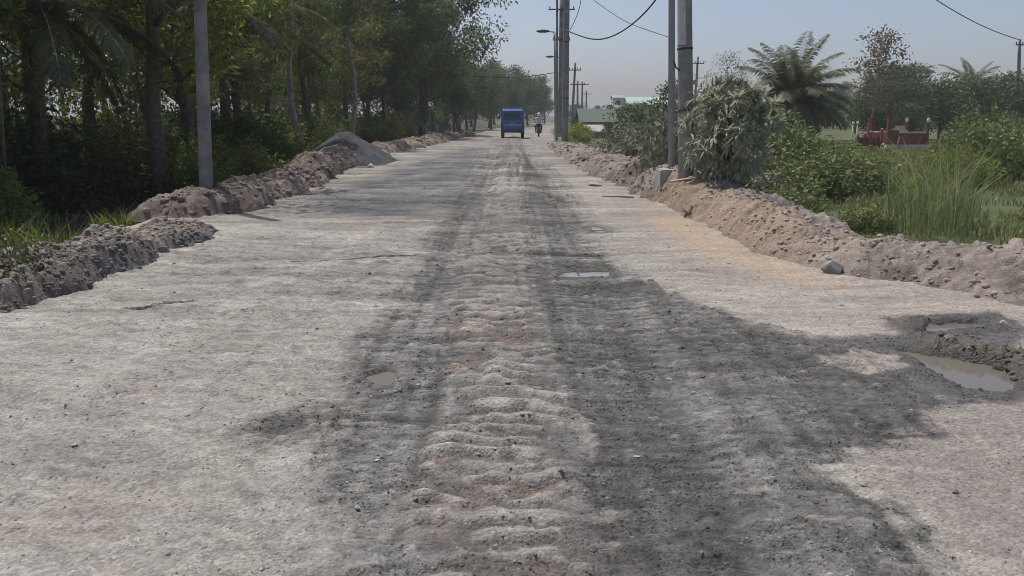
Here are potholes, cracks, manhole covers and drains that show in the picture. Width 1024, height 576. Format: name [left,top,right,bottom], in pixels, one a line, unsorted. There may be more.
crack [290,253,421,263]
pothole [872,332,1024,398]
crack [125,299,197,310]
pothole [352,363,416,390]
pothole [551,269,621,279]
pothole [902,313,1008,335]
